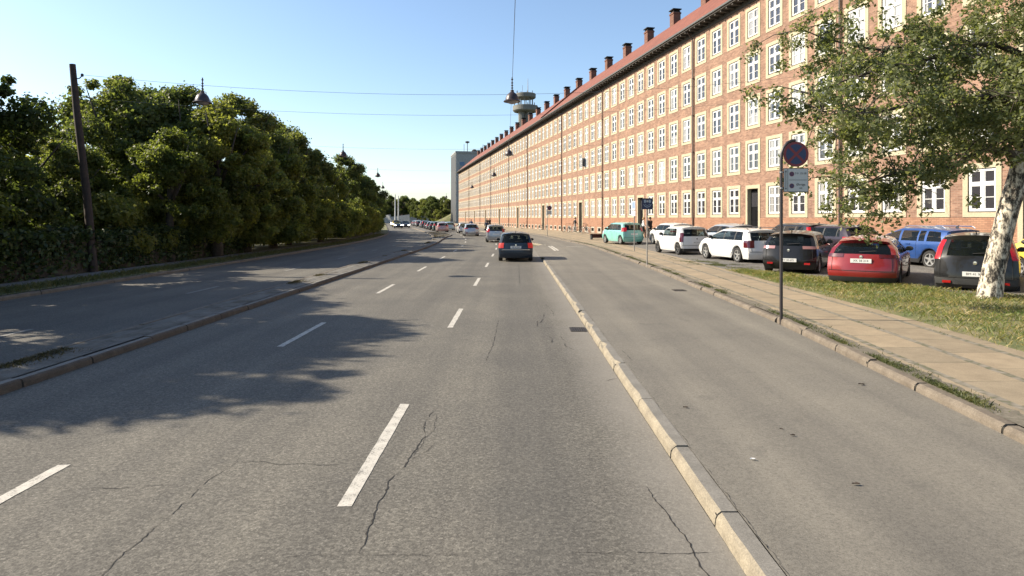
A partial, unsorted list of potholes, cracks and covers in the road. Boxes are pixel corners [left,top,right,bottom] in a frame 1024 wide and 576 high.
crack [102,406,439,575]
crack [647,487,710,576]
